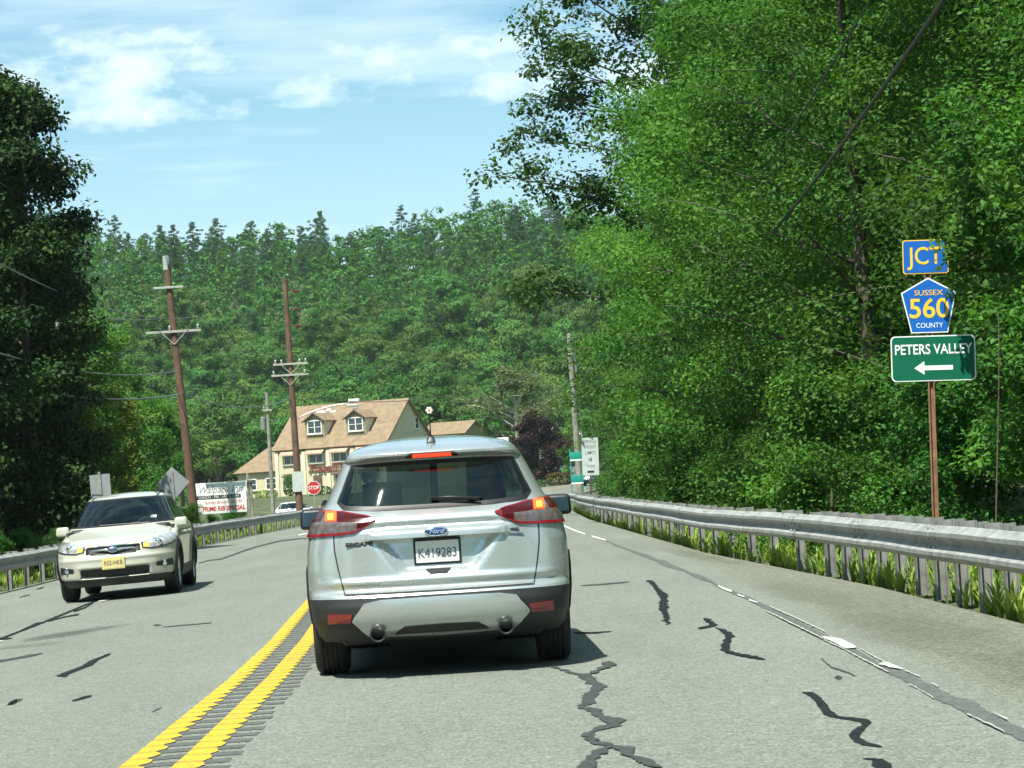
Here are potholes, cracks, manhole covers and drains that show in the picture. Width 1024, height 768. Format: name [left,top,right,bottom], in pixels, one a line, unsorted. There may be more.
crack [581,540,1024,768]
crack [550,661,661,768]
crack [0,587,115,677]
